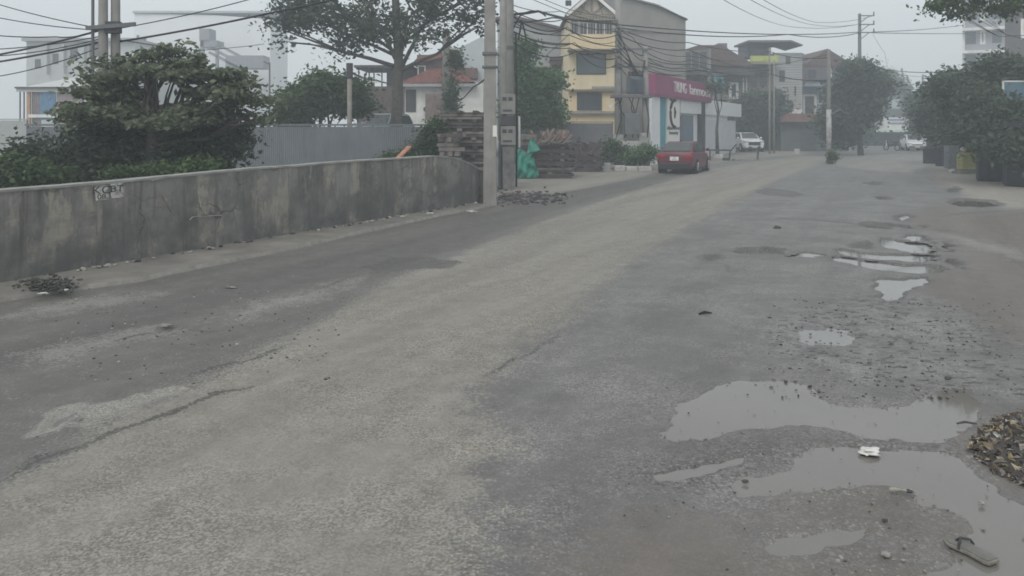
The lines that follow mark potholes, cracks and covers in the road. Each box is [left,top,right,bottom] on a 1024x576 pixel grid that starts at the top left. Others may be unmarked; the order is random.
pothole [647,376,1003,448]
pothole [814,255,961,274]
pothole [638,448,757,485]
pothole [751,188,809,197]
pothole [775,322,872,352]
pothole [828,248,948,263]
pothole [850,221,920,230]
pothole [714,440,1024,576]
pothole [842,240,885,251]
pothole [870,236,949,256]
pothole [941,198,1012,208]
pothole [866,274,937,303]
